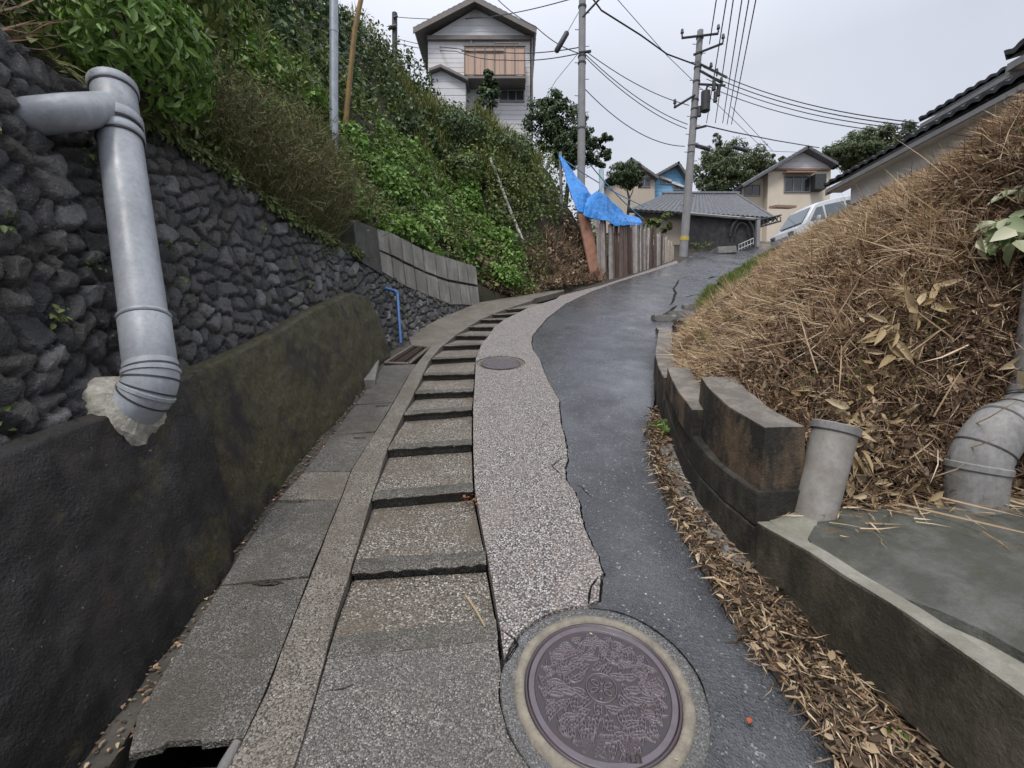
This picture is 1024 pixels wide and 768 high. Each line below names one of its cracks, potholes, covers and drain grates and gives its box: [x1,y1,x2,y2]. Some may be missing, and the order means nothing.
manhole cover [477,357,525,370]
manhole cover [500,608,711,768]
drain grate [383,345,430,365]
crack [663,280,693,315]
